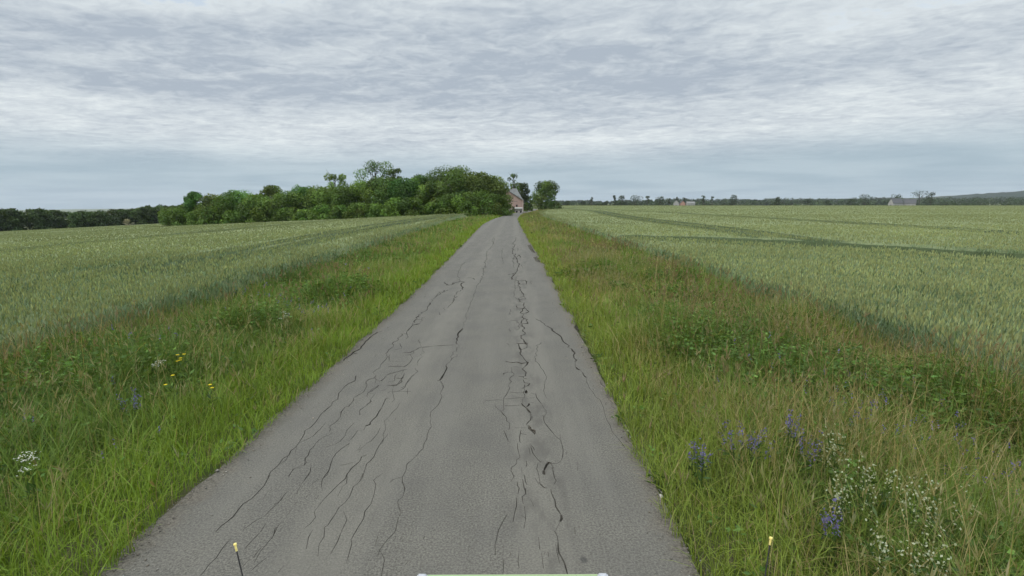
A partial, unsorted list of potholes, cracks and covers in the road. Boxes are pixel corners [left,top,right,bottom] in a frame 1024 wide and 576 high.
crack [200,238,495,576]
crack [488,239,643,574]
